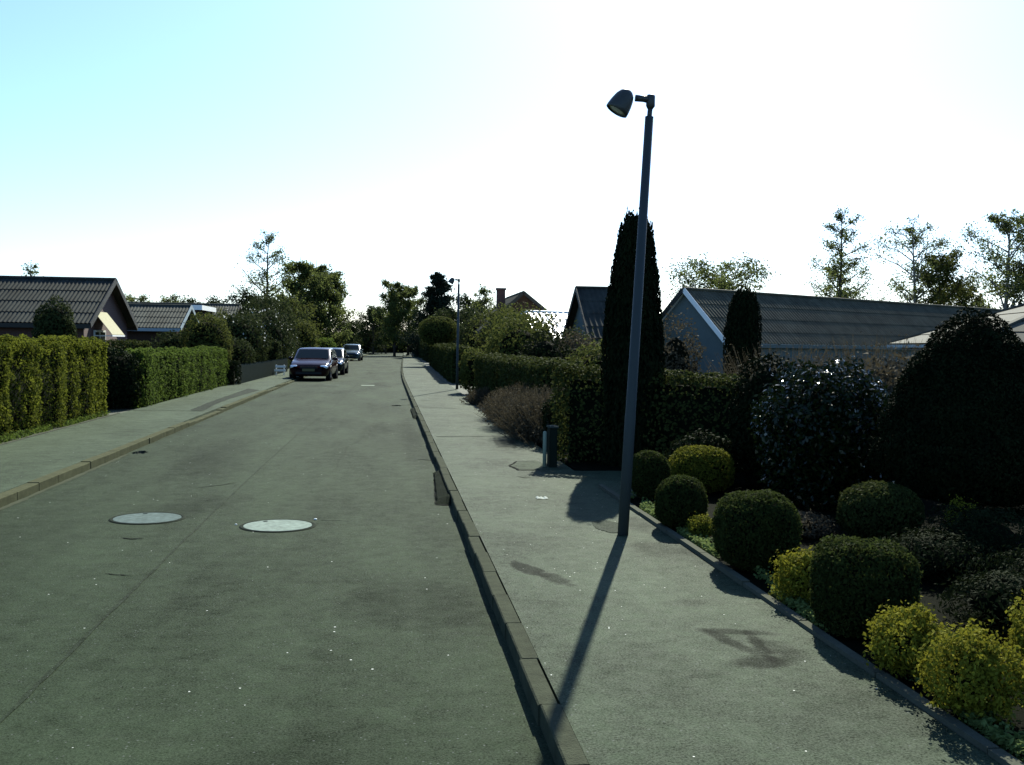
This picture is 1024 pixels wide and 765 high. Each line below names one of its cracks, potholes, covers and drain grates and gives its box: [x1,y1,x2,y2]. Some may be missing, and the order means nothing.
manhole cover [109,512,186,525]
manhole cover [239,519,316,532]
